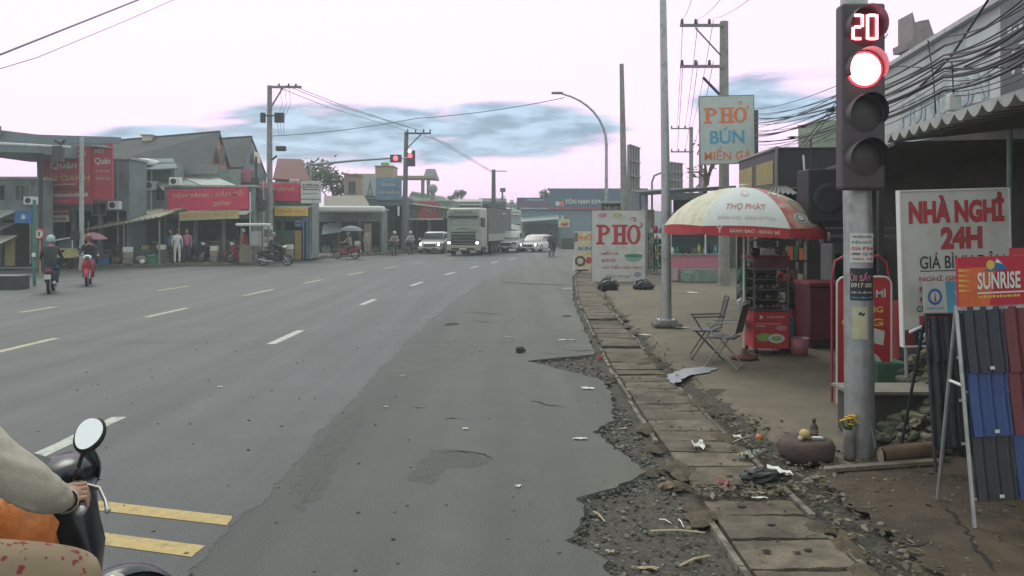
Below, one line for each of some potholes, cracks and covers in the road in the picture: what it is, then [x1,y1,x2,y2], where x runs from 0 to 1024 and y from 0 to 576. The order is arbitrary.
pothole [596,405,665,475]
pothole [533,354,613,386]
pothole [568,477,728,576]
